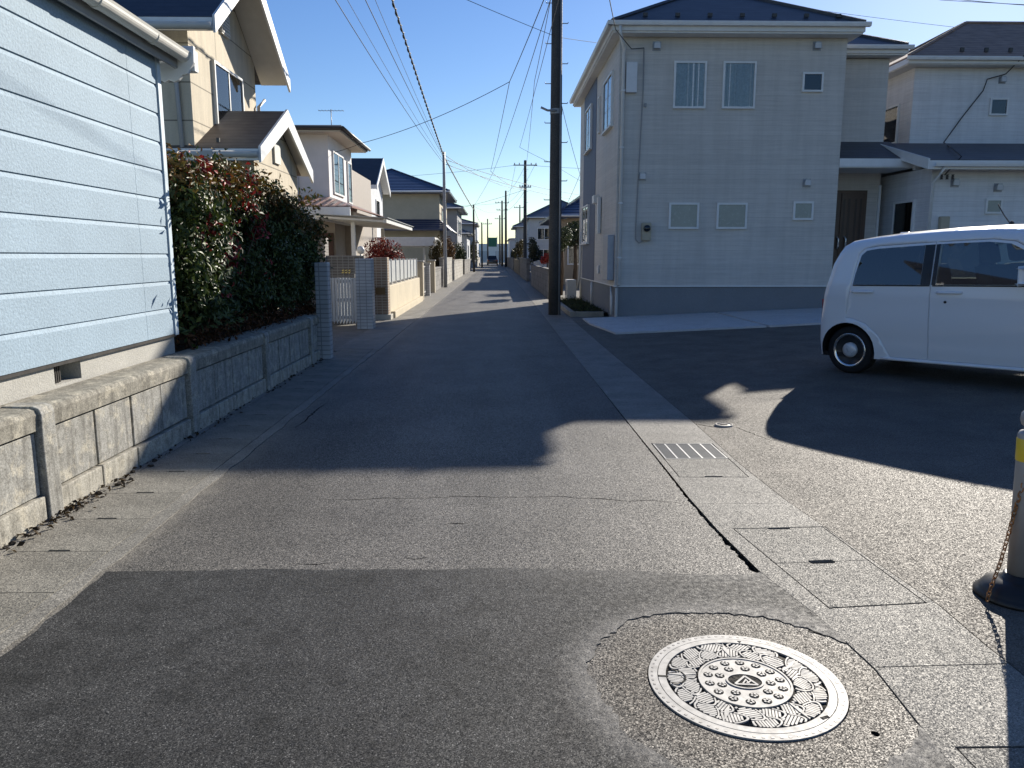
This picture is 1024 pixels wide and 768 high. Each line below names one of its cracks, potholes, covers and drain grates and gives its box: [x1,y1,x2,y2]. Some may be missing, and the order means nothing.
manhole cover [648,635,849,743]
drain grate [653,443,728,460]
